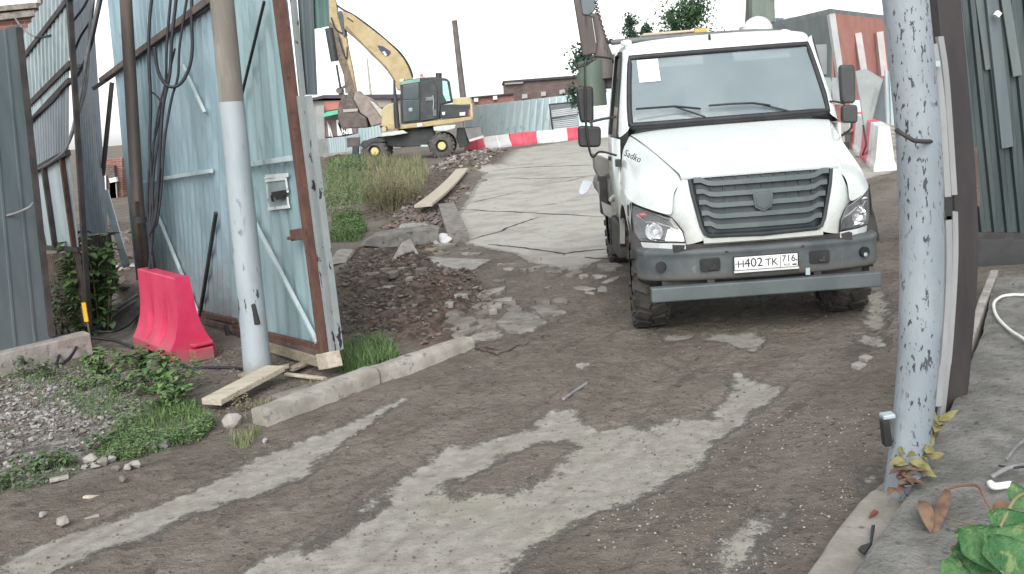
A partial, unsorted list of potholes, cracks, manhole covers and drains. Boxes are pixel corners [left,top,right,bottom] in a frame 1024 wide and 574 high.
crack [474,335,545,355]
crack [462,165,609,269]
